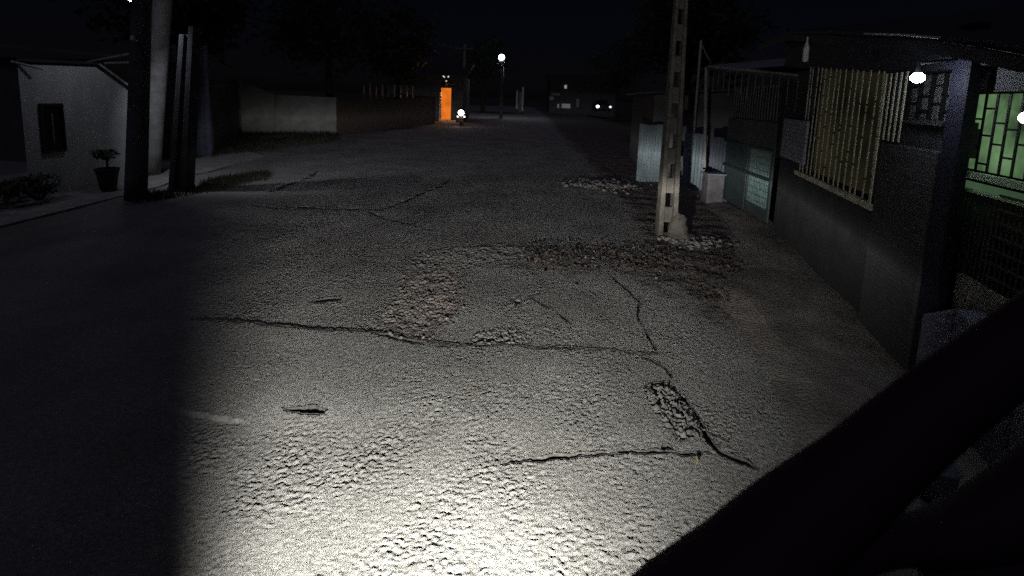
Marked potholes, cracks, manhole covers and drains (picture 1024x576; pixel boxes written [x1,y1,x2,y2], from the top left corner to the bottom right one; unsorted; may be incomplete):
crack [255,171,450,227]
pothole [643,384,705,443]
crack [189,272,759,470]
pothole [281,405,328,415]
